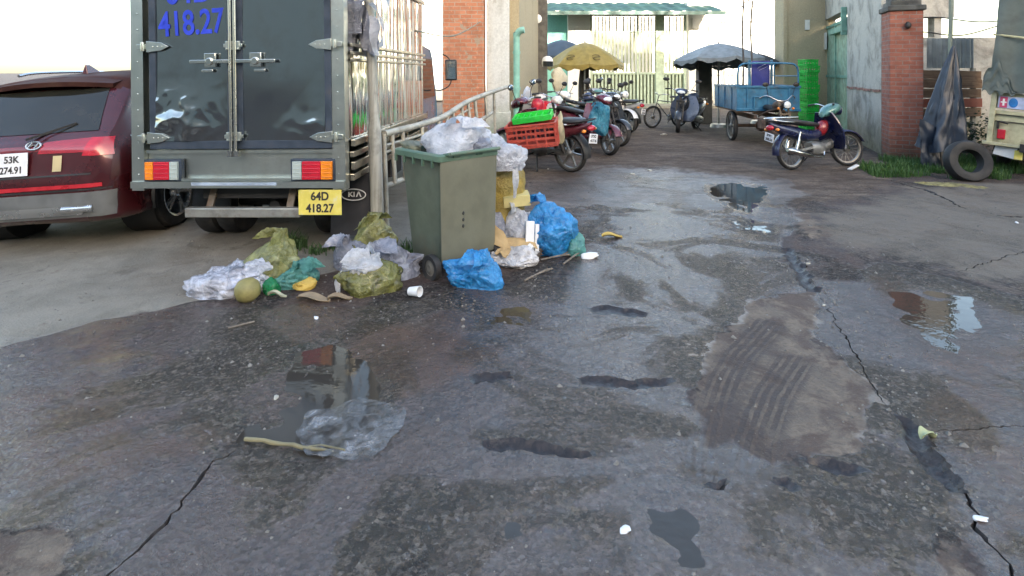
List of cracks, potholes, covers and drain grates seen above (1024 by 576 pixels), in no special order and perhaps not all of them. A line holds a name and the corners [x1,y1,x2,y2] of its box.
pothole [481,437,596,459]
crack [106,451,234,576]
crack [820,298,892,410]
pothole [577,375,676,390]
pothole [469,371,512,384]
pothole [587,305,648,318]
crack [934,425,1024,576]
